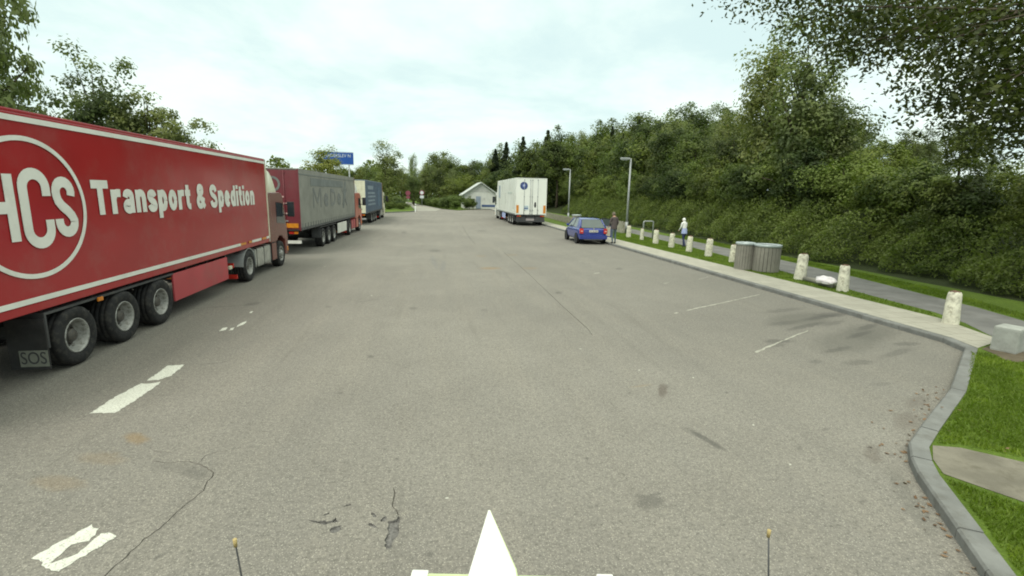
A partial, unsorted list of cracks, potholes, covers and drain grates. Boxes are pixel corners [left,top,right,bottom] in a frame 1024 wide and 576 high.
crack [104,450,221,576]
pothole [309,504,351,533]
